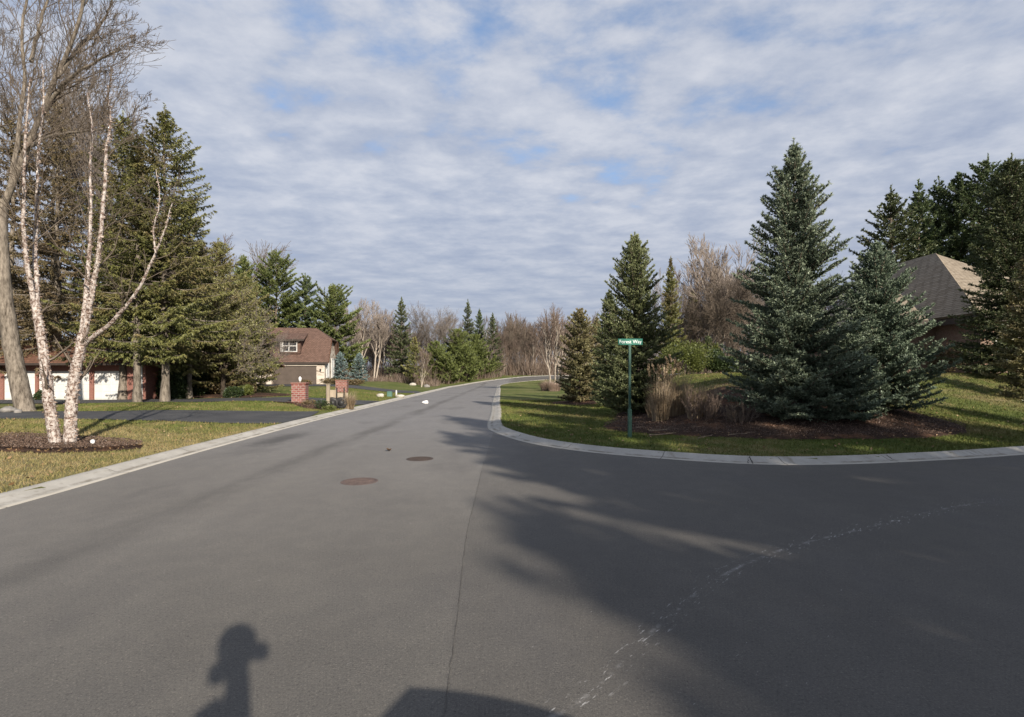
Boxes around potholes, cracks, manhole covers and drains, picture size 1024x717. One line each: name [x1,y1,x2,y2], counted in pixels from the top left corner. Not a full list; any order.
manhole cover [340,477,378,485]
